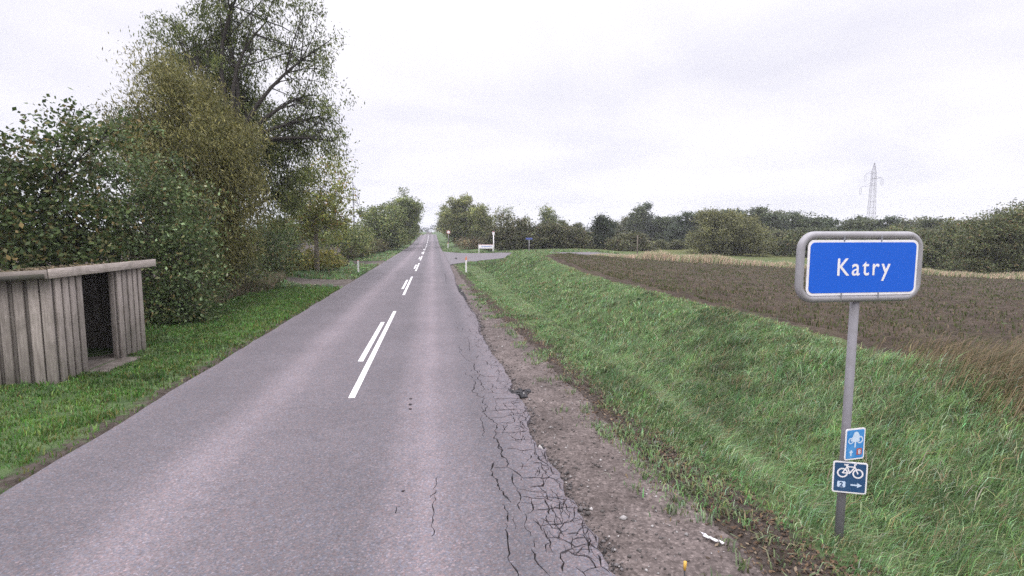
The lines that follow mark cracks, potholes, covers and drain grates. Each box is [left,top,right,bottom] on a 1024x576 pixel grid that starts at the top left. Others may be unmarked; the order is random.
crack [469,349,601,571]
